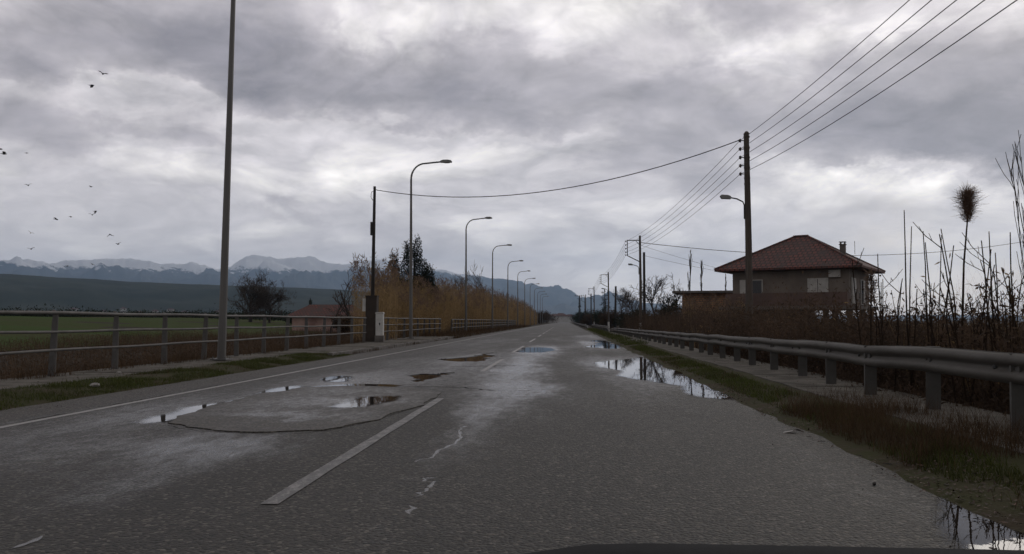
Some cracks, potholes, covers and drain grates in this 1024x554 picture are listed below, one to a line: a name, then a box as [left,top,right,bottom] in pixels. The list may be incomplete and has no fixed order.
pothole [437,352,497,362]
crack [404,424,469,515]
pothole [408,372,455,382]
